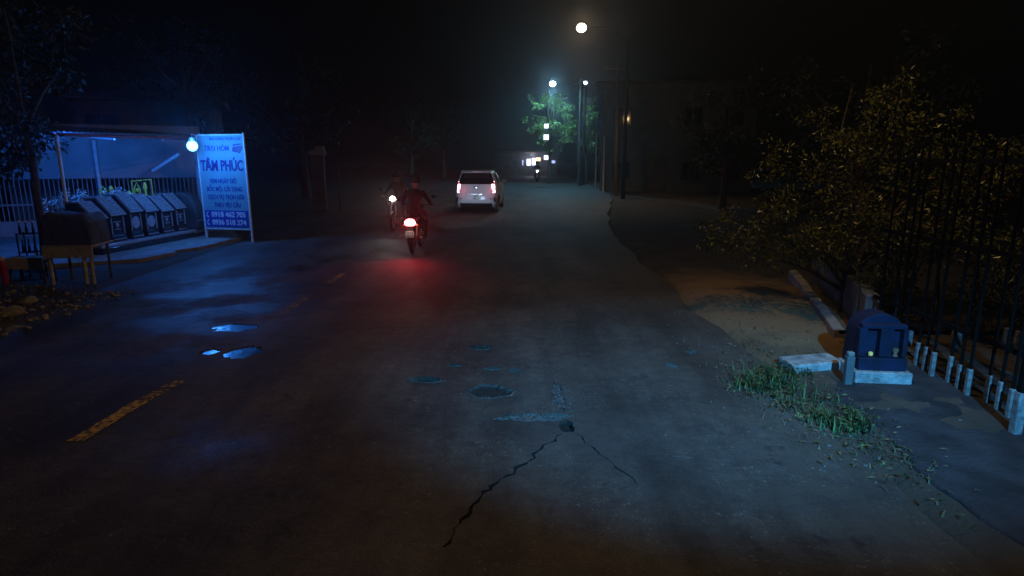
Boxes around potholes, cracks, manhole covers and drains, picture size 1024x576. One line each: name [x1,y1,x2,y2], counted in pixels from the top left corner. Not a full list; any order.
crack [443,420,636,547]
pothole [466,384,516,399]
pothole [219,345,265,360]
